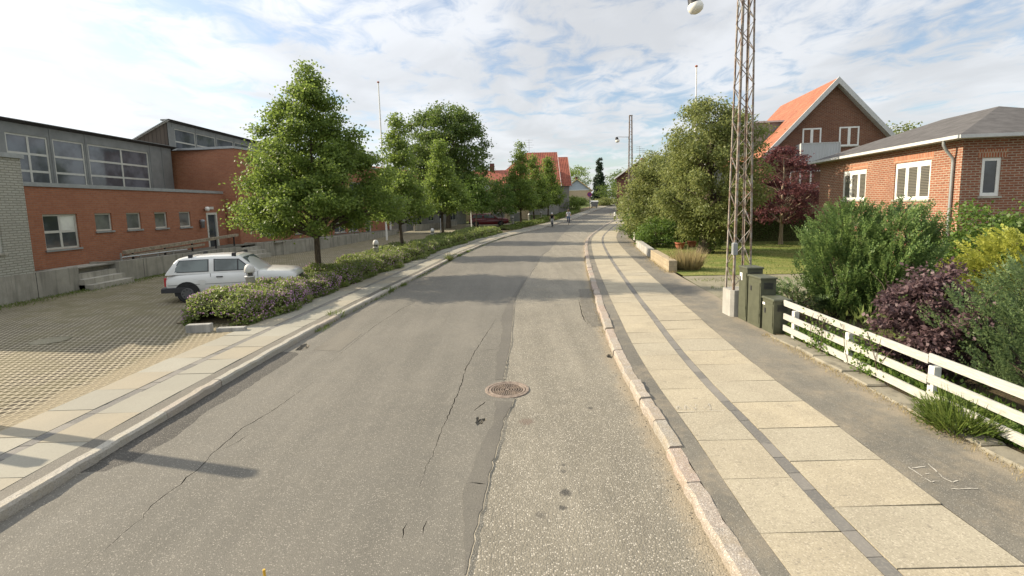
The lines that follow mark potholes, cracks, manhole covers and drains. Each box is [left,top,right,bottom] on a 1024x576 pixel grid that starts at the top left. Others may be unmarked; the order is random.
crack [421,329,493,481]
crack [87,385,309,565]
manhole cover [485,381,529,398]
